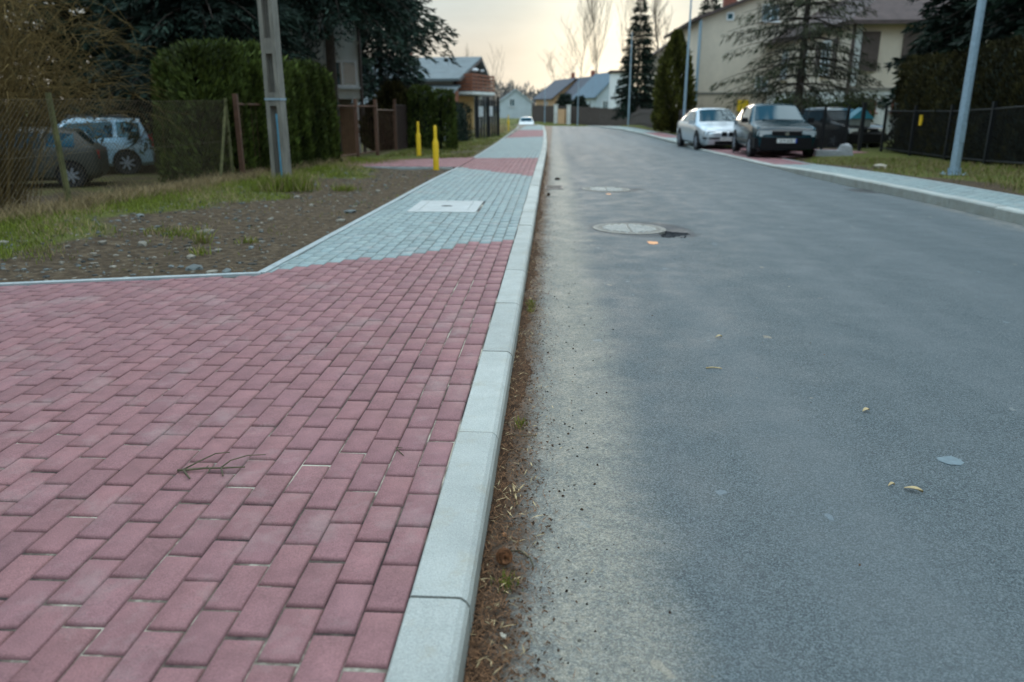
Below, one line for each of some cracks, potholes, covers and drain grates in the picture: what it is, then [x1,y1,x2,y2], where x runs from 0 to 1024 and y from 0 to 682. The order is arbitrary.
manhole cover [593,223,666,235]
utility cover [407,200,484,213]
